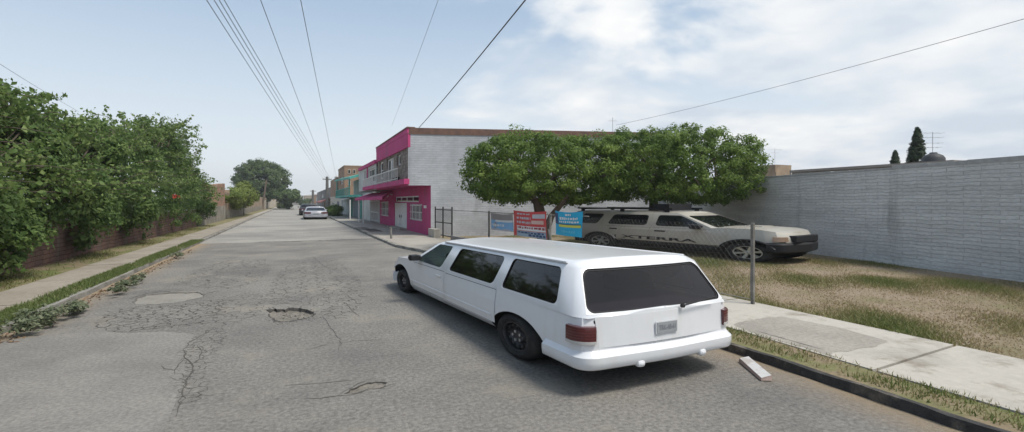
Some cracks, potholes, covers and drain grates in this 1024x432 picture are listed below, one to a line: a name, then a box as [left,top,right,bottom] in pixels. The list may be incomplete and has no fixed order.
crack [91,258,363,416]
pothole [261,306,326,325]
crack [294,379,391,399]
